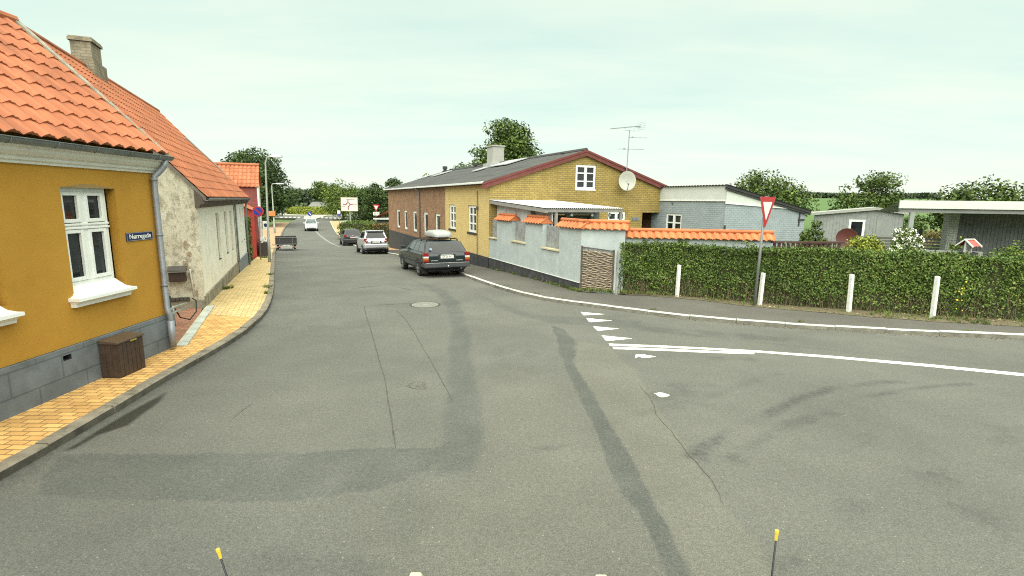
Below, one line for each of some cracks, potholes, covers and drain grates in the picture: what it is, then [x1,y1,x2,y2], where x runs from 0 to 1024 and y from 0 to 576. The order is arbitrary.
crack [386,288,452,399]
crack [364,306,396,448]
